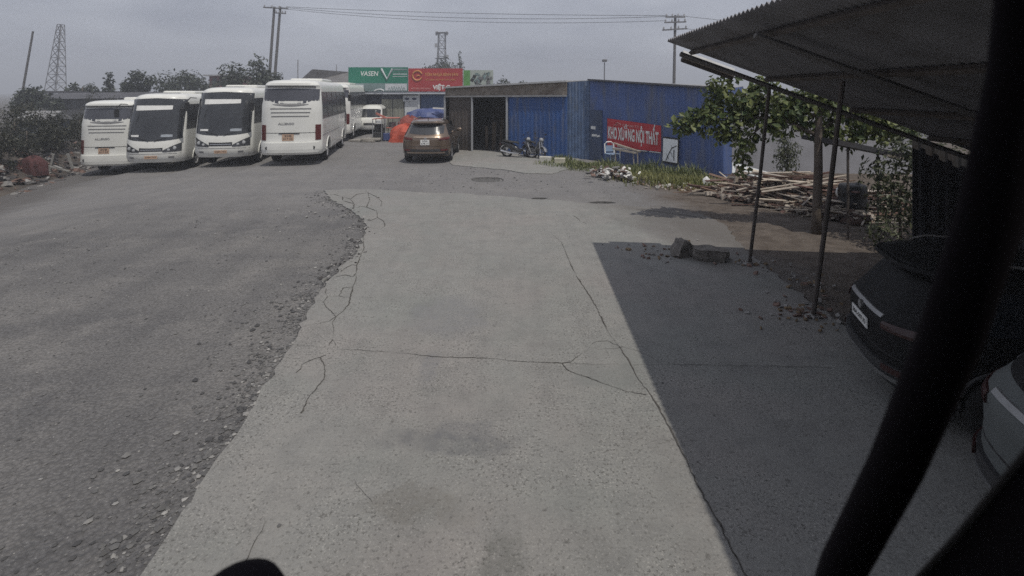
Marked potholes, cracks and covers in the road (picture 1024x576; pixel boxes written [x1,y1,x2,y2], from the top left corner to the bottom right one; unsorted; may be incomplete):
crack [290,193,817,576]
